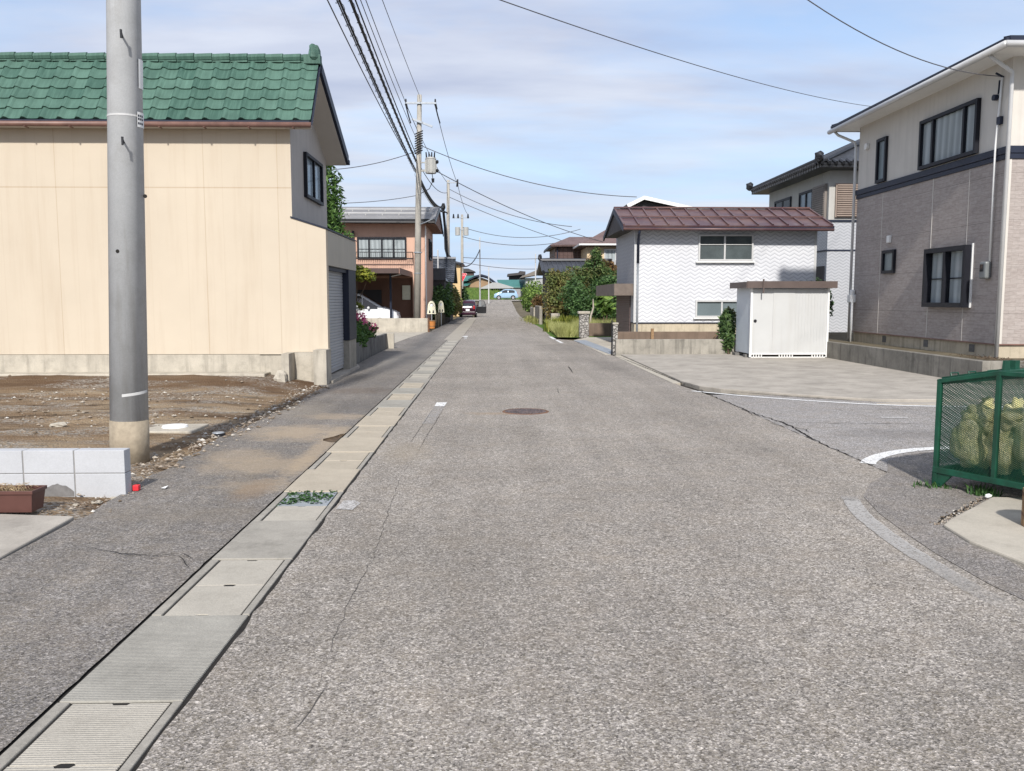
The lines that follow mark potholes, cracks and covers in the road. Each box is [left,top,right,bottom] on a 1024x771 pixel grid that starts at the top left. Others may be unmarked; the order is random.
crack [294,410,440,730]
crack [90,547,205,567]
crack [682,384,920,471]
